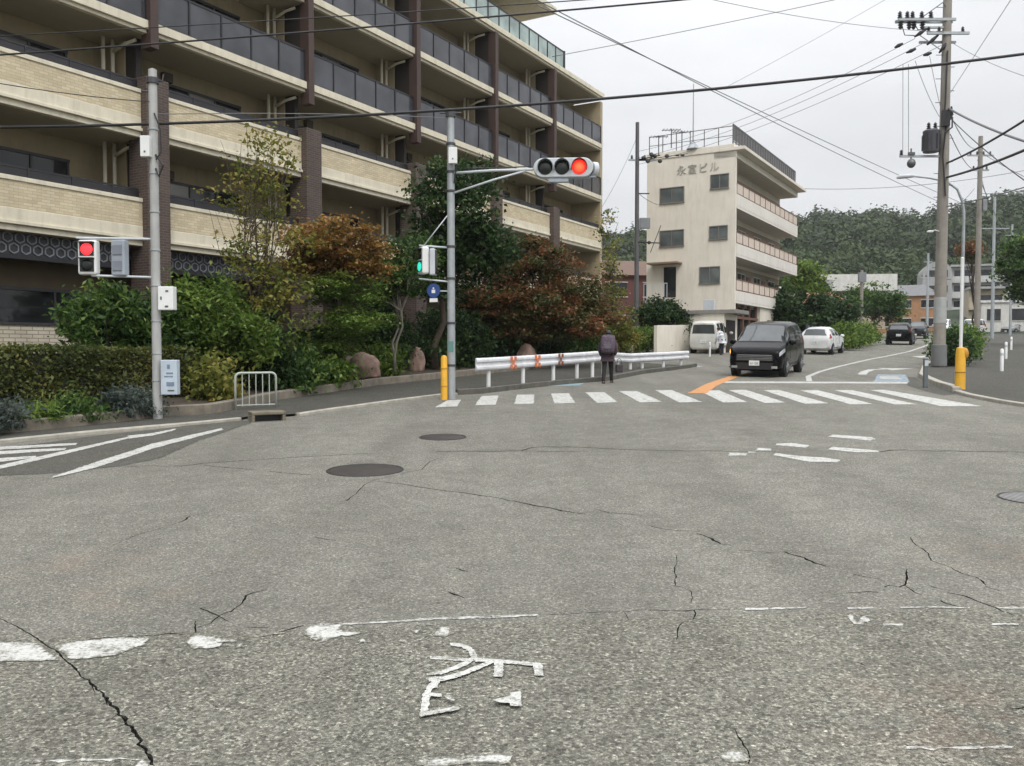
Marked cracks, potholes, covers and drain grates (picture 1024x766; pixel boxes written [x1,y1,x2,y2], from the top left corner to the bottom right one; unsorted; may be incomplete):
crack [346,447,1007,566]
drain grate [248,410,286,422]
crack [851,538,1021,616]
manhole cover [996,492,1024,503]
crack [2,556,721,766]
manhole cover [326,463,404,477]
